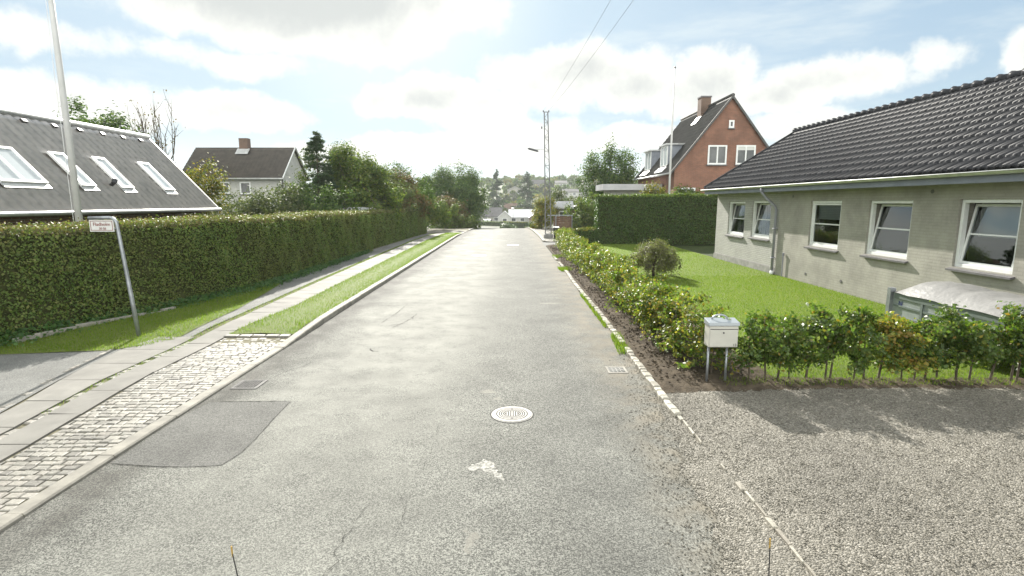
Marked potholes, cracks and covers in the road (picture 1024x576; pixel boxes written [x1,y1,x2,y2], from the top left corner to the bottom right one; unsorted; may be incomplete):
manhole cover [490,406,534,423]
drain grate [230,380,268,389]
